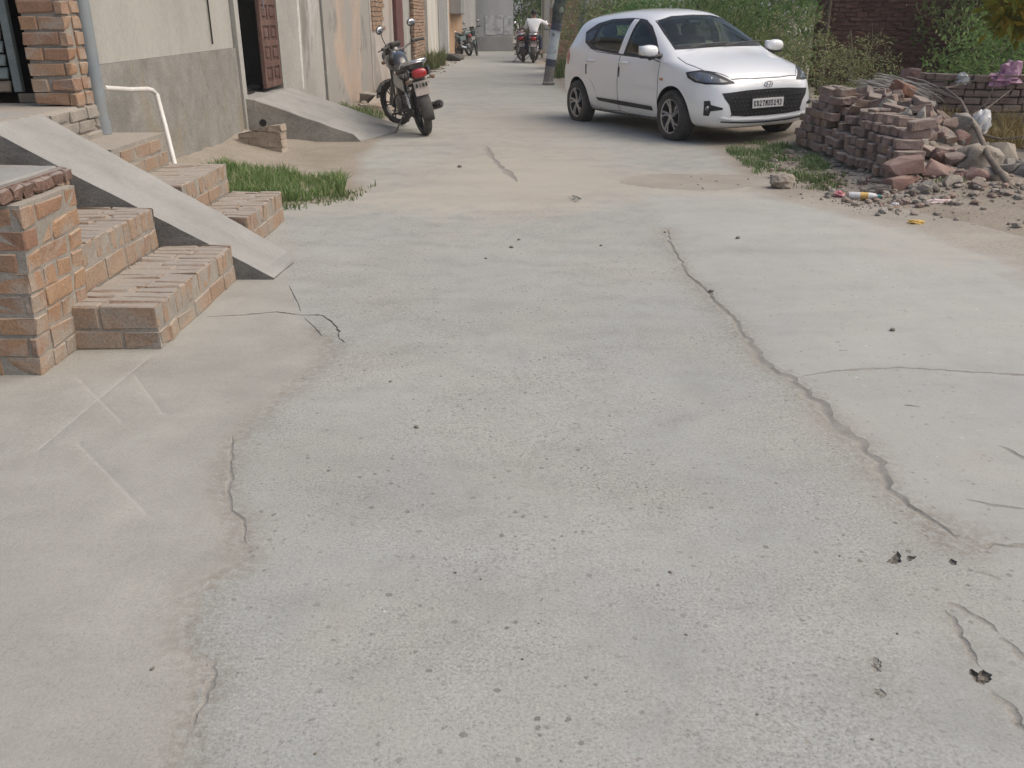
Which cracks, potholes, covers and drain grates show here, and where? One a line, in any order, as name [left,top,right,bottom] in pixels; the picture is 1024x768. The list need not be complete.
crack [964,498,1024,510]
crack [207,286,344,342]
crack [191,657,218,728]
crack [944,602,1024,667]
crack [989,690,1024,733]
crack [483,146,518,182]
crack [225,435,248,545]
